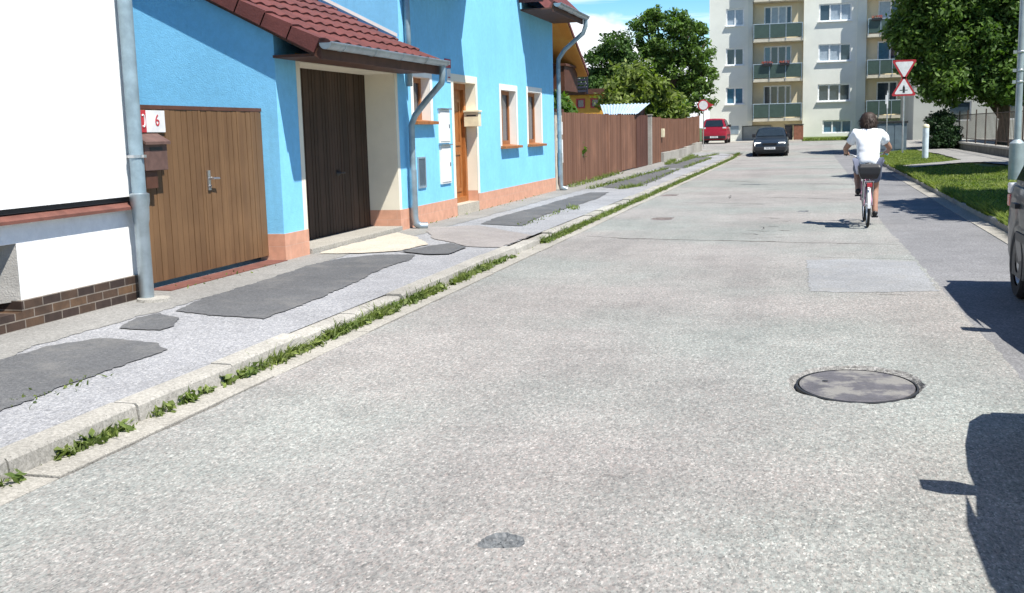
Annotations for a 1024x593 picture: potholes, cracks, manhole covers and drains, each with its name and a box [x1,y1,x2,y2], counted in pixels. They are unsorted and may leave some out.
manhole cover [787,365,927,404]
